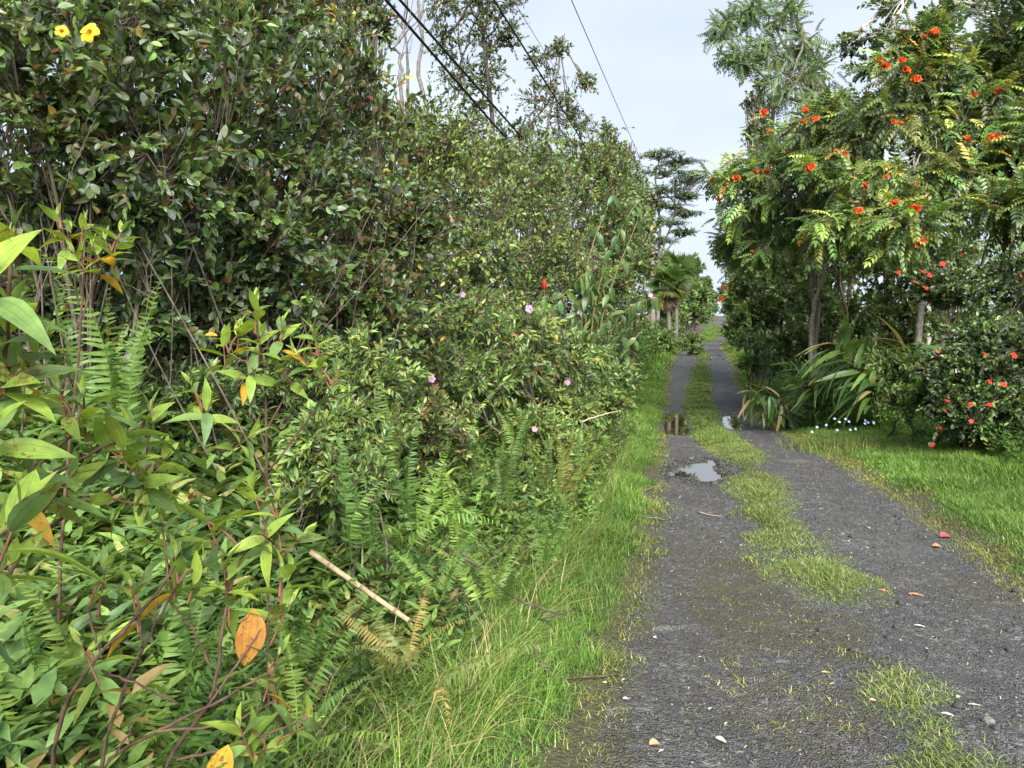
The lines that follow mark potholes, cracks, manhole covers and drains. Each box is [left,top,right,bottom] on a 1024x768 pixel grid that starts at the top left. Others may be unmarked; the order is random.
pothole [659,458,734,483]
pothole [660,412,693,436]
pothole [718,413,747,431]
